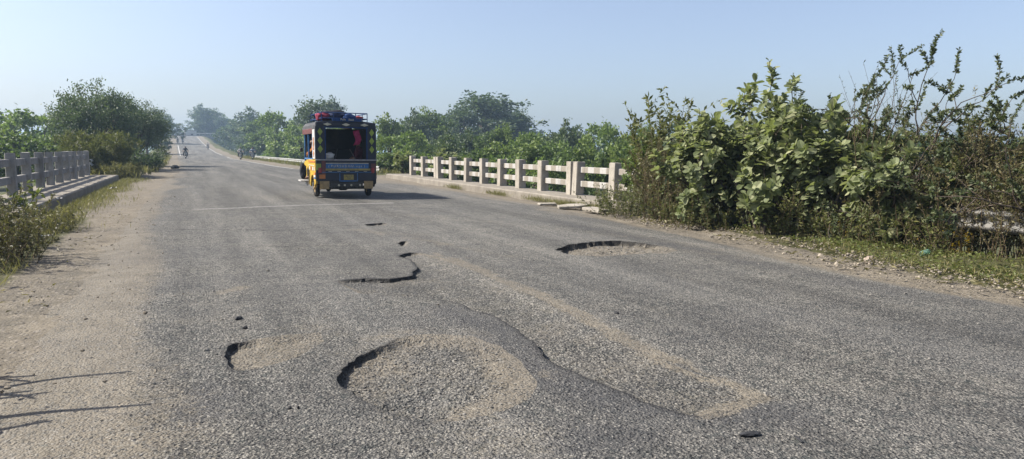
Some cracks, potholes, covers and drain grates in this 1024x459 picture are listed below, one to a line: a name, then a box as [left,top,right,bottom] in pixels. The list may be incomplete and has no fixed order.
pothole [224,332,324,371]
pothole [556,241,677,257]
pothole [337,253,760,417]
